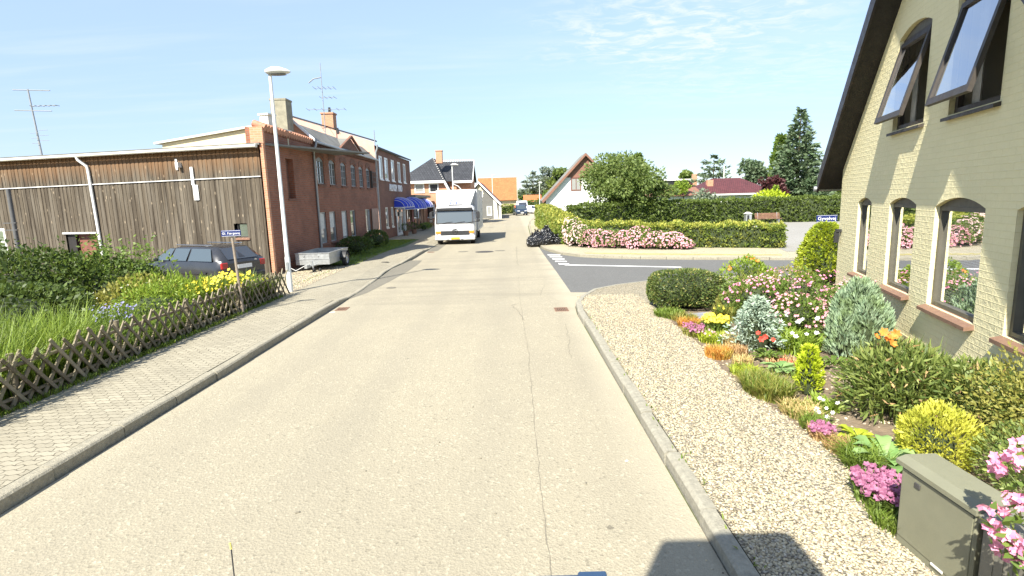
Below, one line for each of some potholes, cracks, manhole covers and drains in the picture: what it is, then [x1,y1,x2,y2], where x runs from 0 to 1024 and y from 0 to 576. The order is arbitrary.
crack [474,248,552,576]
